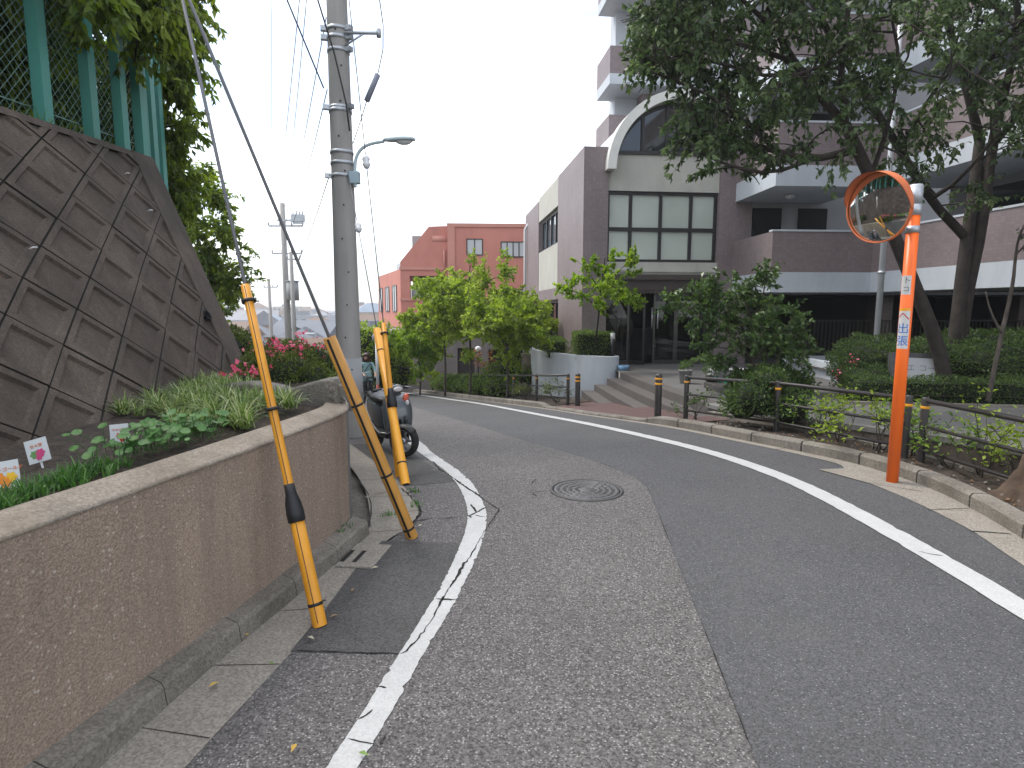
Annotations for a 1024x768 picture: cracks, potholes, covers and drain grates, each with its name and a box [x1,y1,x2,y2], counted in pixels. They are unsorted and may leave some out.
crack [348,709,386,744]
manhole cover [550,479,624,502]
crack [301,461,544,653]
